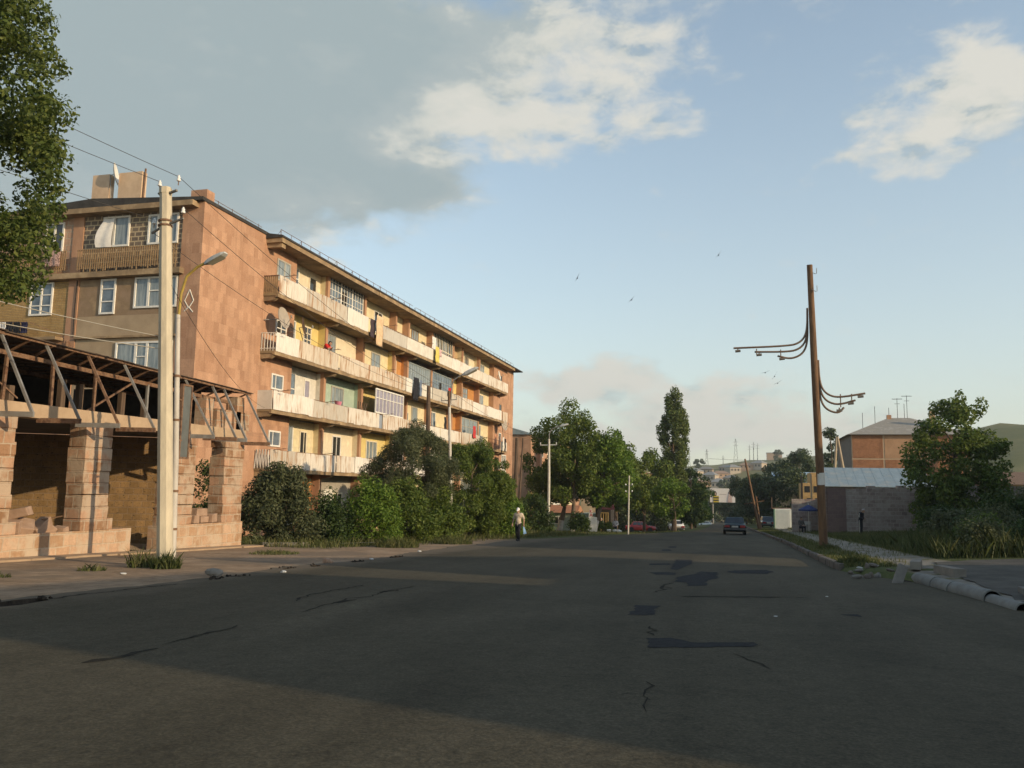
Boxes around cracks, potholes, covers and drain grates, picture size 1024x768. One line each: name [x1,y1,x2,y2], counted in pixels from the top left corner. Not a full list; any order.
crack [620,681,655,712]
crack [82,625,237,663]
